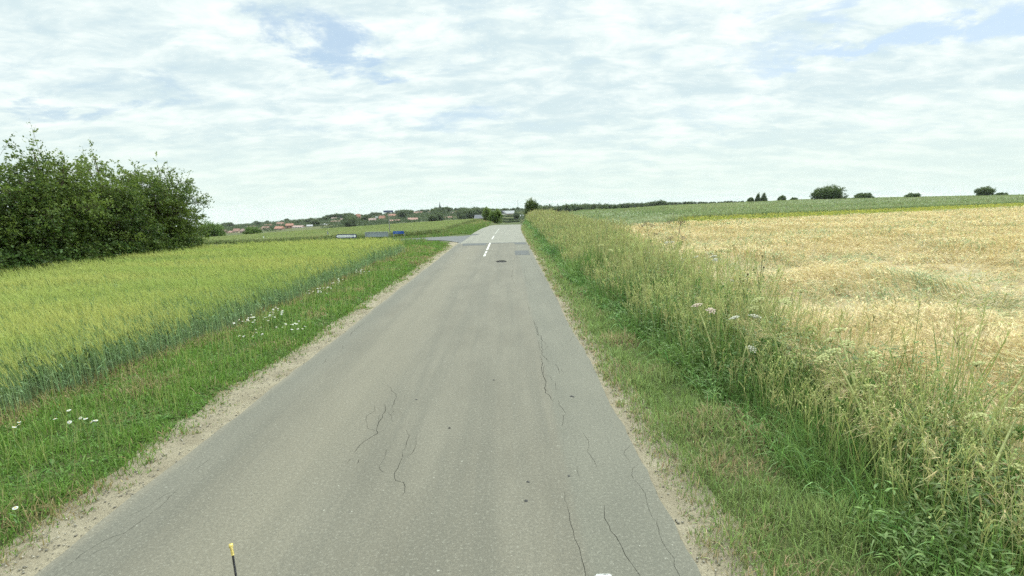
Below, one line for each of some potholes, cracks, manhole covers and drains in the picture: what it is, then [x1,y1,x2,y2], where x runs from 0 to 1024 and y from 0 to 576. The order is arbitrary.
crack [347,387,416,493]
crack [533,320,566,425]
crack [60,491,176,571]
